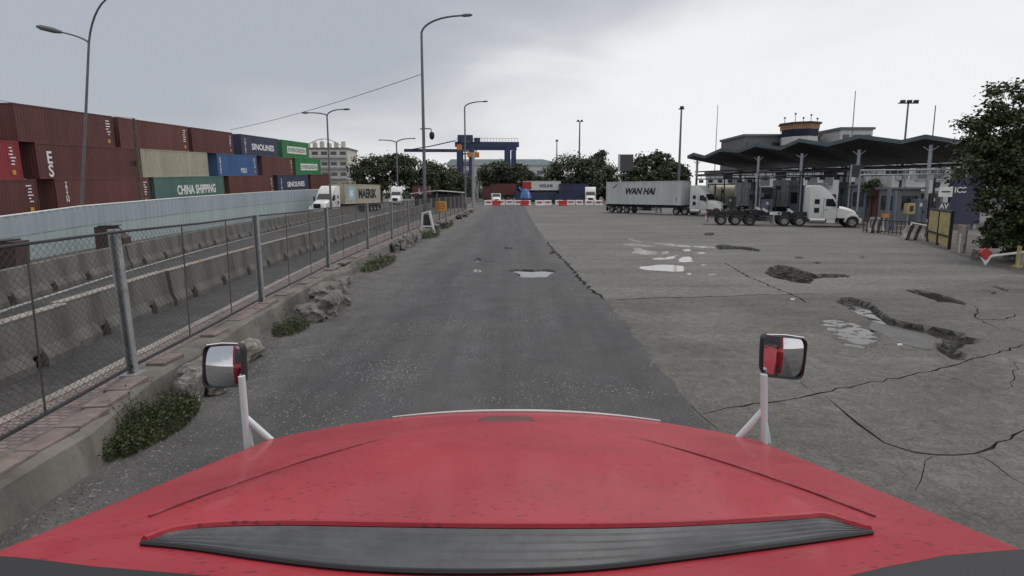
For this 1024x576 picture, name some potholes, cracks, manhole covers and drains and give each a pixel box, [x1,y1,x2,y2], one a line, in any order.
pothole [507,269,557,278]
crack [725,263,810,304]
crack [690,304,1024,490]
pothole [714,244,760,252]
pothole [764,265,850,284]
pothole [905,289,967,305]
pothole [836,297,982,363]
pothole [819,318,885,349]
